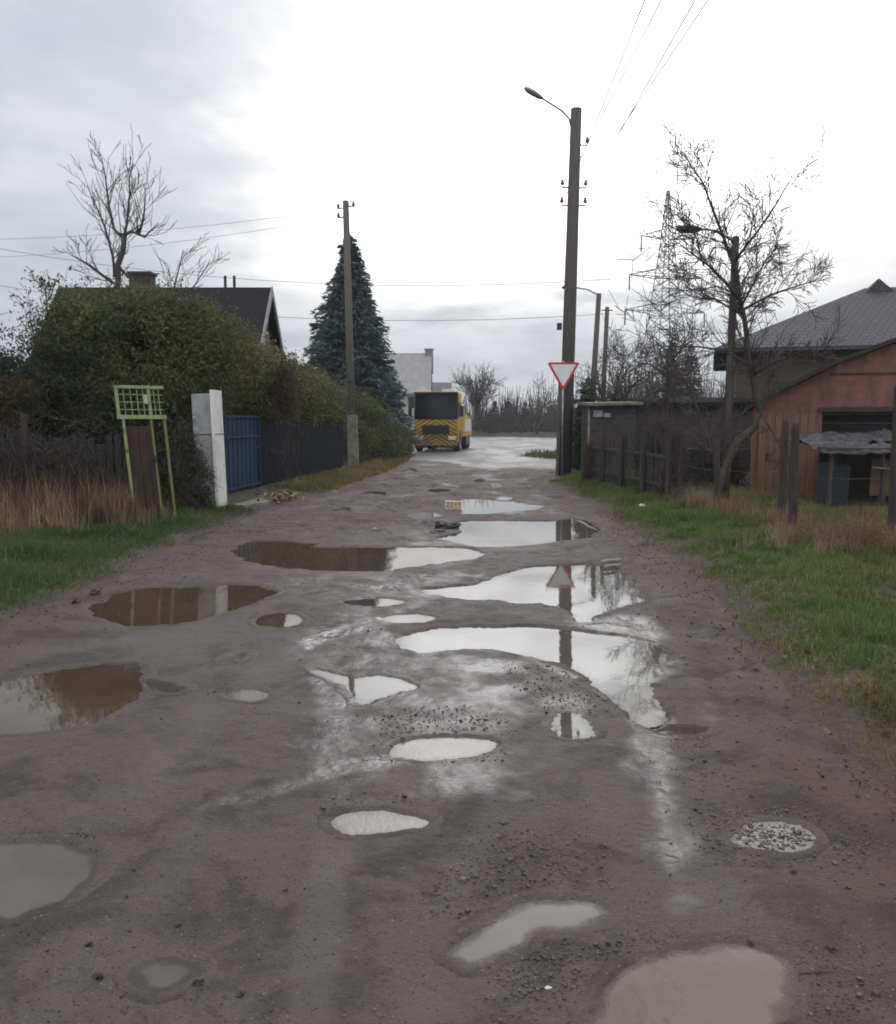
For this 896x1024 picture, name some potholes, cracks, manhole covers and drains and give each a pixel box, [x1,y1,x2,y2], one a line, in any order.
pothole [429,887,630,978]
pothole [317,803,443,841]
pothole [213,686,281,704]
pothole [0,832,121,929]
pothole [382,622,685,730]
pothole [301,666,427,708]
pothole [450,498,550,515]
pothole [566,929,817,1024]
pothole [541,709,608,742]
pothole [429,517,607,548]
pothole [376,730,511,764]
